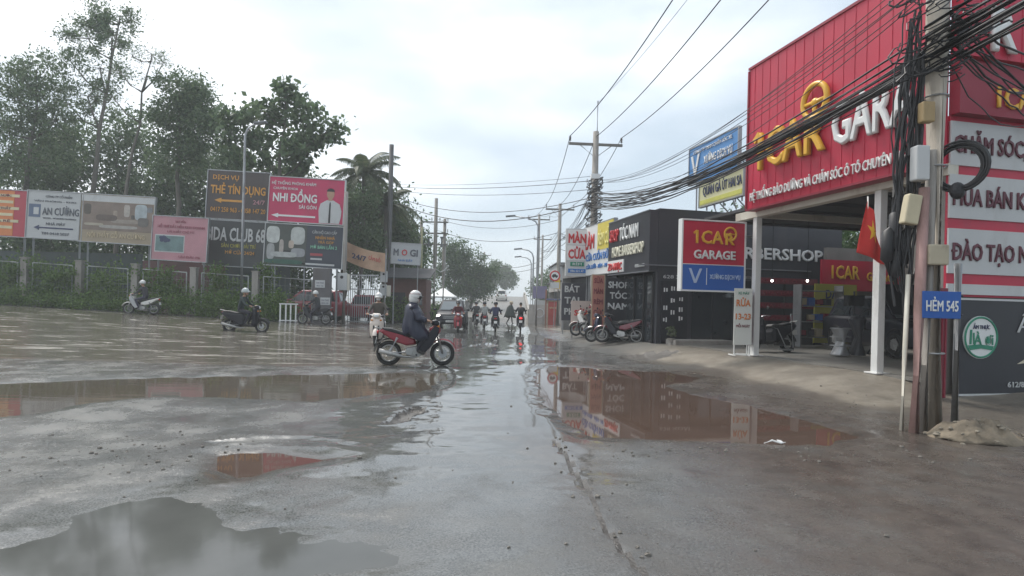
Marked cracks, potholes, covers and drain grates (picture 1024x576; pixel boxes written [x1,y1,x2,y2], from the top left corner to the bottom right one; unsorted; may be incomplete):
pothole [201,449,336,489]
pothole [380,407,427,424]
pothole [532,365,864,446]
crack [552,440,649,576]
